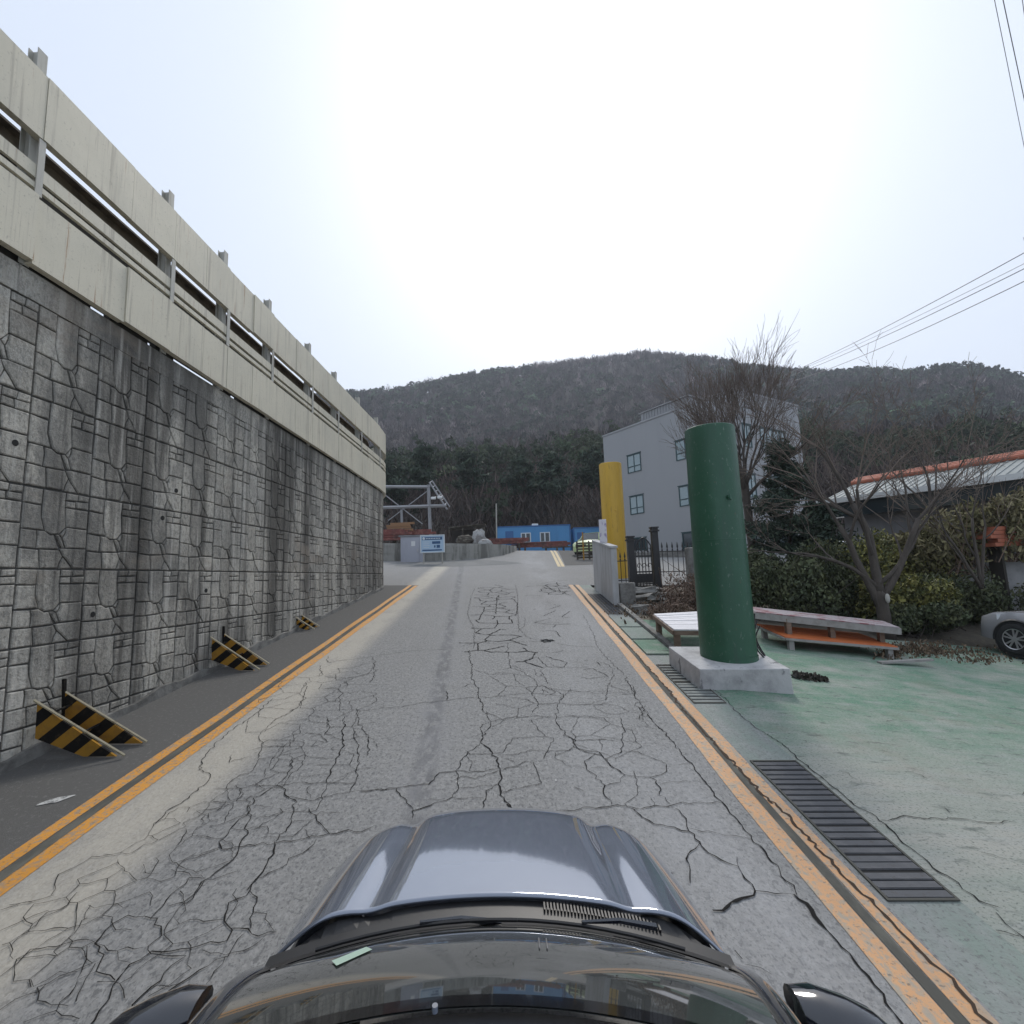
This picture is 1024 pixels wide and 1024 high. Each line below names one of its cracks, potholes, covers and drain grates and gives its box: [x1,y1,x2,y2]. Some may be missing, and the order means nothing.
drain grate [673,681,726,703]
drain grate [656,664,689,682]
drain grate [750,760,960,901]
crack [0,580,1024,1024]
